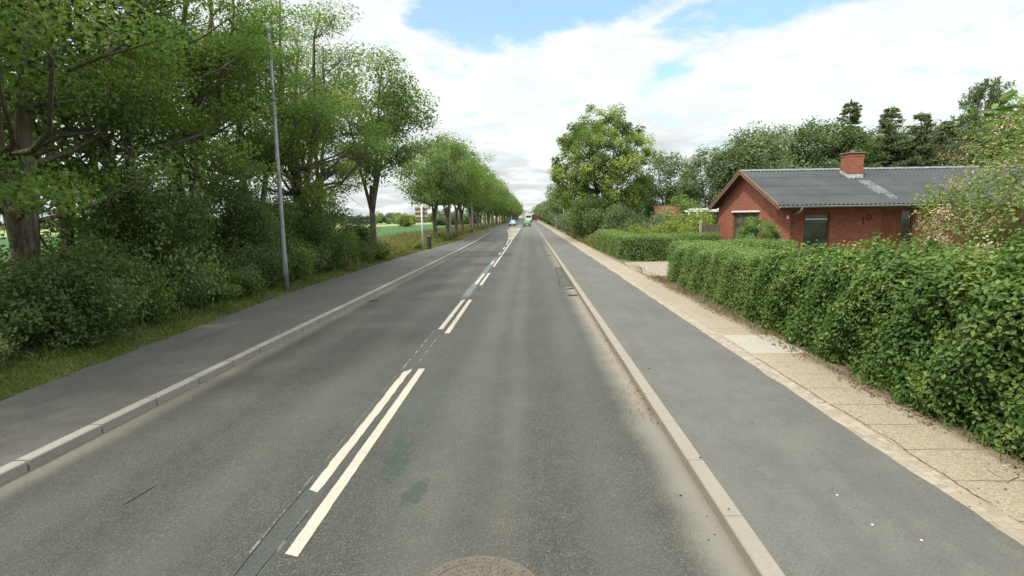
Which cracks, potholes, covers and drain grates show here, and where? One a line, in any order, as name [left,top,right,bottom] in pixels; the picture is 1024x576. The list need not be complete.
manhole cover [425,556,535,576]
